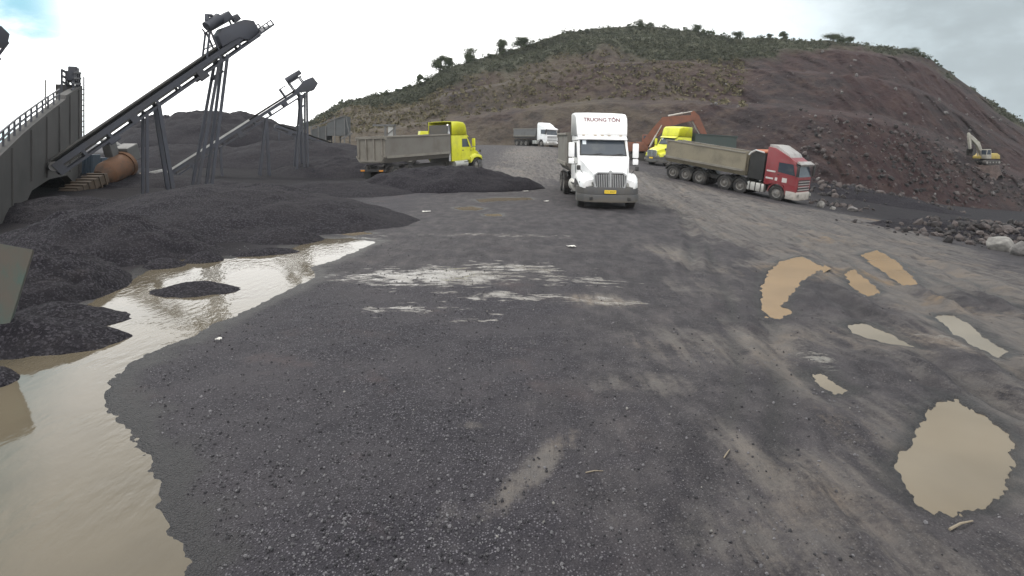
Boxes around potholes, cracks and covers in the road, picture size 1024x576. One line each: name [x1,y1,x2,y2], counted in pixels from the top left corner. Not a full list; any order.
pothole [929,312,1019,361]
pothole [840,320,923,350]
pothole [754,255,831,320]
pothole [879,392,1024,521]
pothole [798,365,862,398]
pothole [855,249,927,288]
pothole [838,267,887,298]
